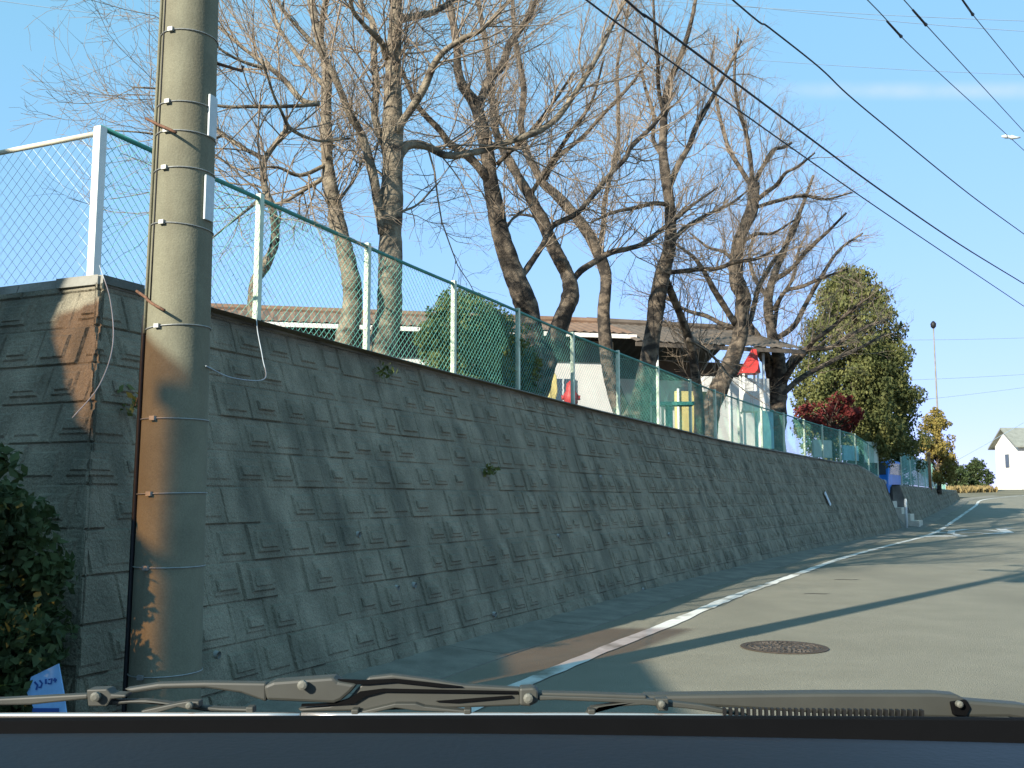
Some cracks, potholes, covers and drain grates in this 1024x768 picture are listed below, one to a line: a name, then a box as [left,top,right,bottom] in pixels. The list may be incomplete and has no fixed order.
manhole cover [740,641,829,654]
